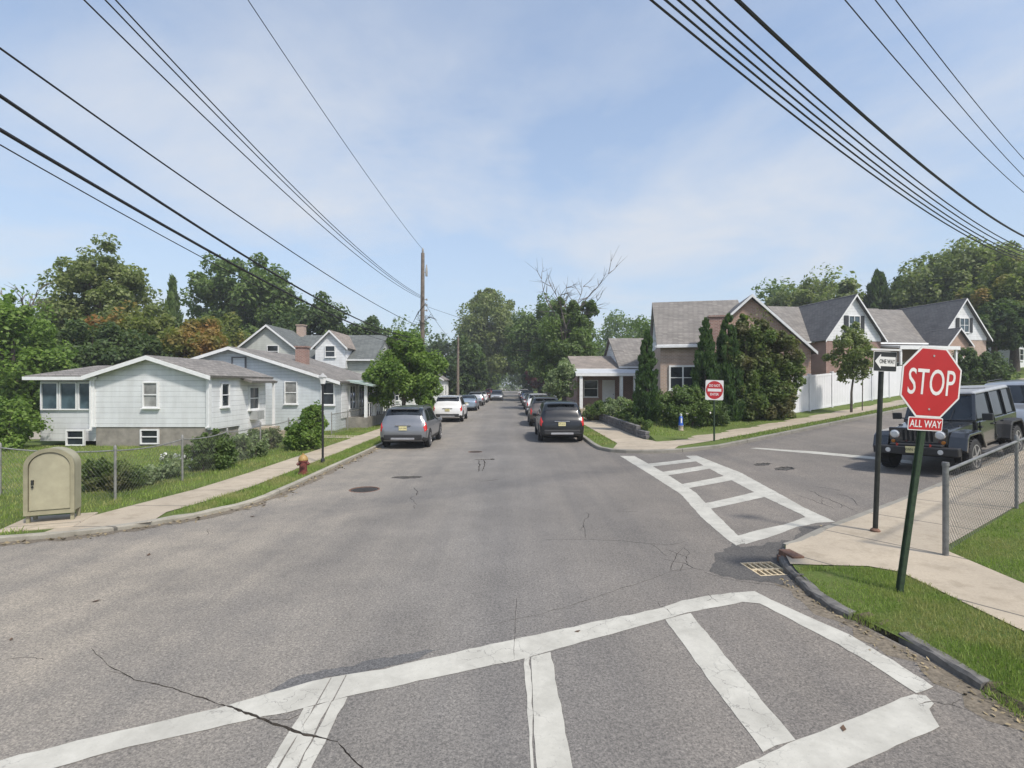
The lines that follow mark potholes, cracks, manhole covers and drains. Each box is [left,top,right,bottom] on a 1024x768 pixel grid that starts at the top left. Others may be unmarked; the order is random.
drain grate [741,549,804,576]
crack [91,648,363,768]
